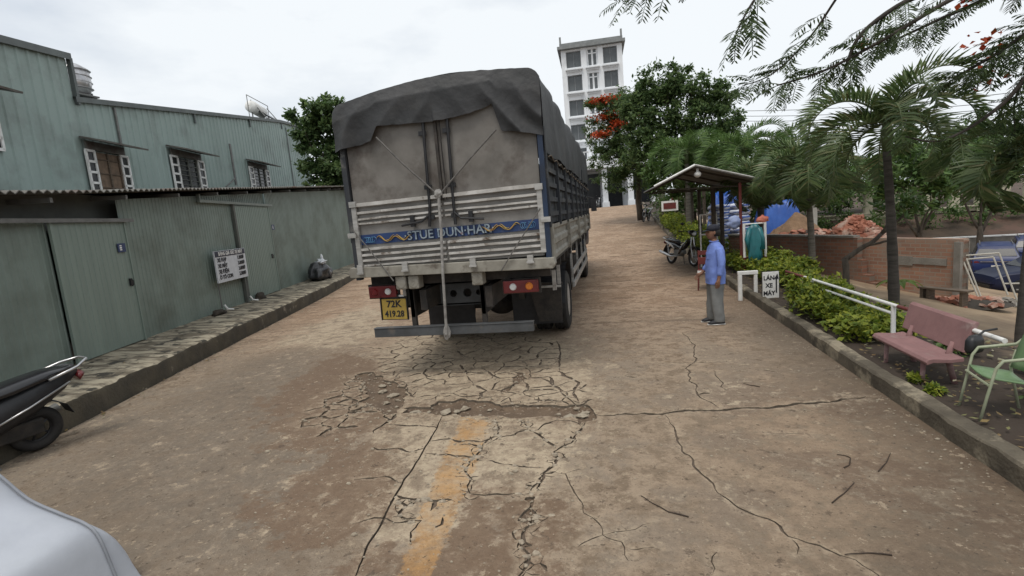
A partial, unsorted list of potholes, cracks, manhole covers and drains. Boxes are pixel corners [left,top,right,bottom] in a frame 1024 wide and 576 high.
pothole [356,372,408,415]
pothole [403,398,597,425]
crack [300,332,879,576]
